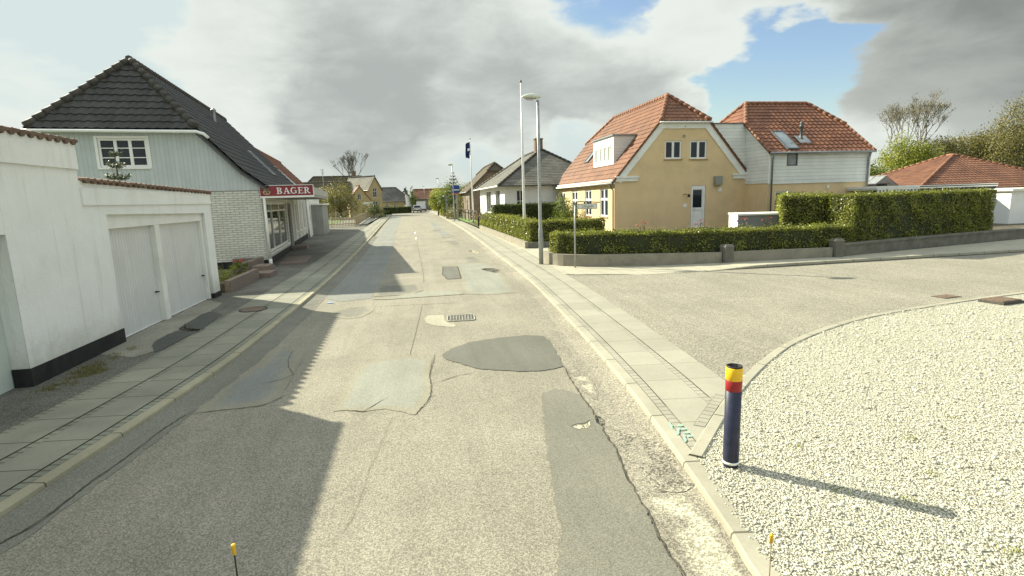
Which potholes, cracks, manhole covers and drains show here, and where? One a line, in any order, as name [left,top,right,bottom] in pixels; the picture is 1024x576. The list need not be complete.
manhole cover [978,296,1024,306]
